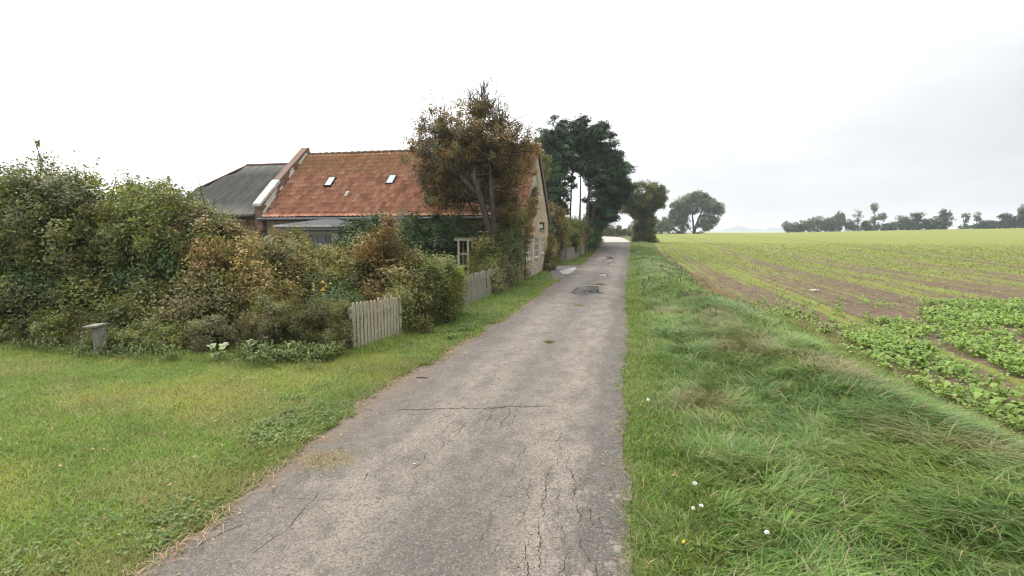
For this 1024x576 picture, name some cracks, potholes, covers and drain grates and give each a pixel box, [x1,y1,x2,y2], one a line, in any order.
pothole [571,285,601,295]
crack [481,424,620,576]
crack [252,491,328,554]
crack [398,398,541,494]
